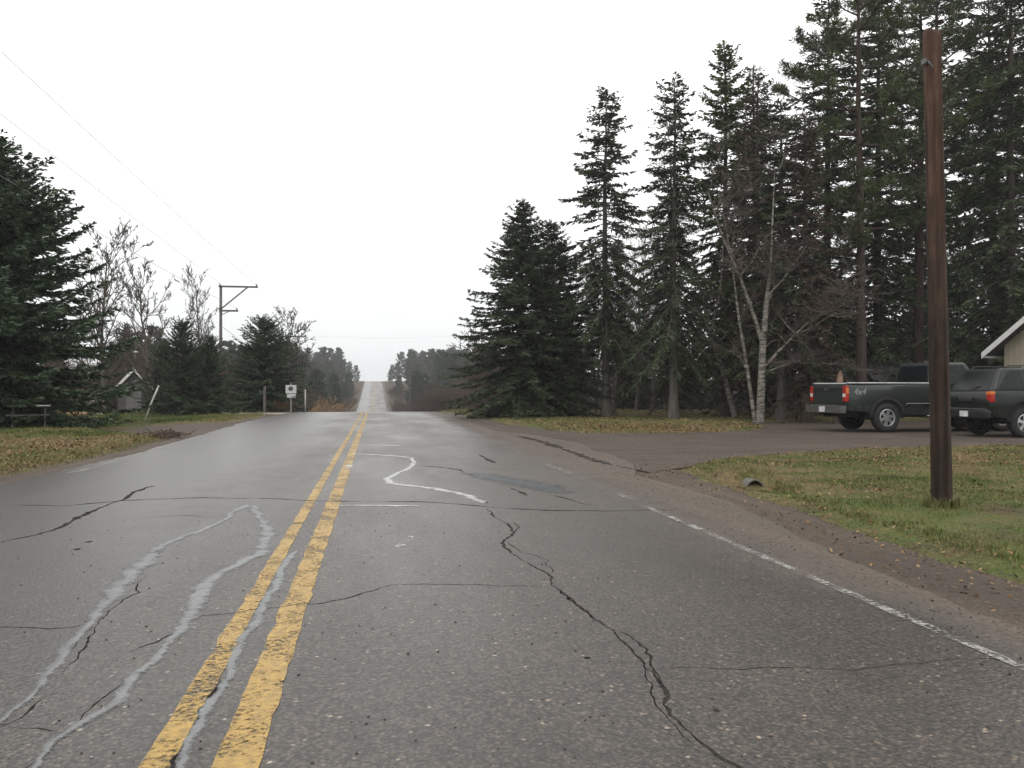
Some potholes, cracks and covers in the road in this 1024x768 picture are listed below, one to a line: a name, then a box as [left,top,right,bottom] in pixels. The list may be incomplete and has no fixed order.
crack [518,436,650,473]
crack [0,445,1001,768]
